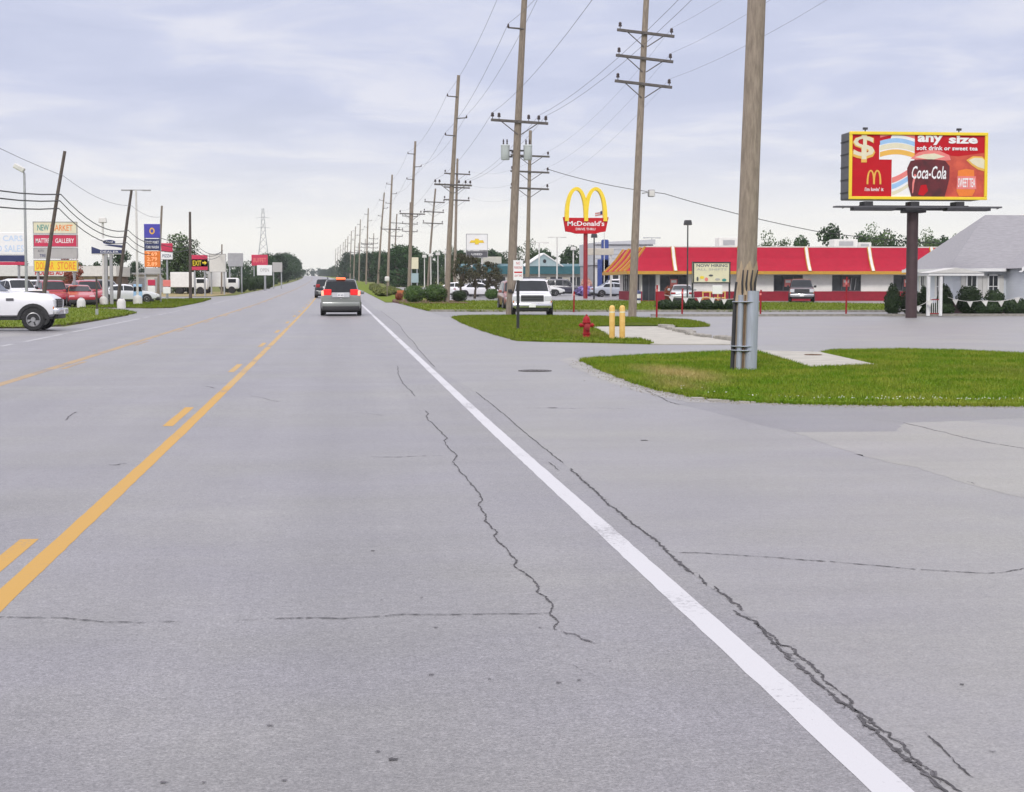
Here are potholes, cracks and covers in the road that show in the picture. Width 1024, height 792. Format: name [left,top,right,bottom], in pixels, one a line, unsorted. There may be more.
crack [683,552,1023,573]
crack [297,366,592,642]
crack [925,732,973,777]
